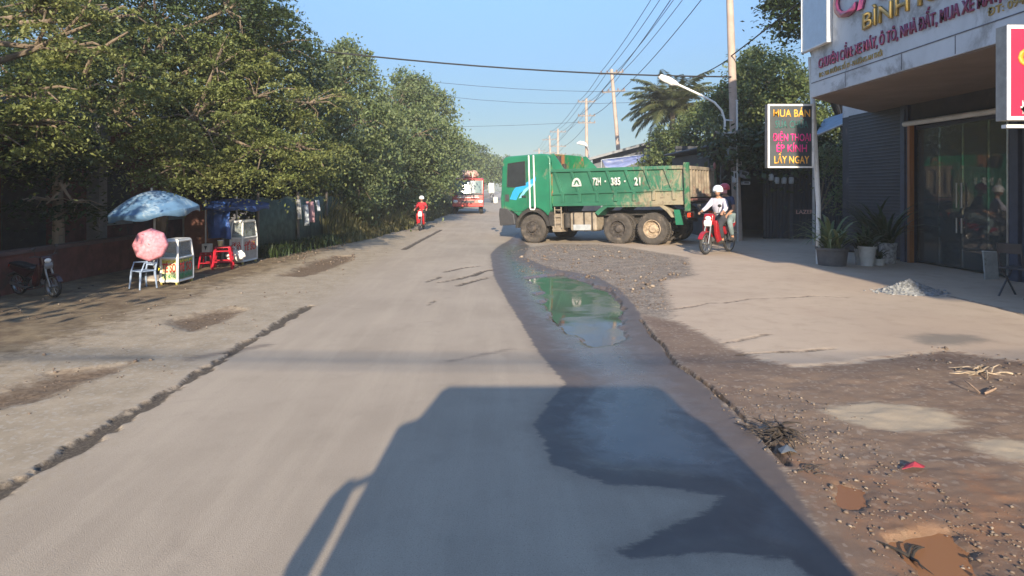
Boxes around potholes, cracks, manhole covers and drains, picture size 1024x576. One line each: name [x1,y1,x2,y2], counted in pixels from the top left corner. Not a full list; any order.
crack [401,230,442,250]
crack [640,306,792,466]
pothole [523,273,630,347]
pothole [0,362,135,410]
crack [428,266,494,286]
crack [737,337,833,356]
crack [0,305,312,500]
pothole [276,255,356,277]
pothole [163,306,249,332]
